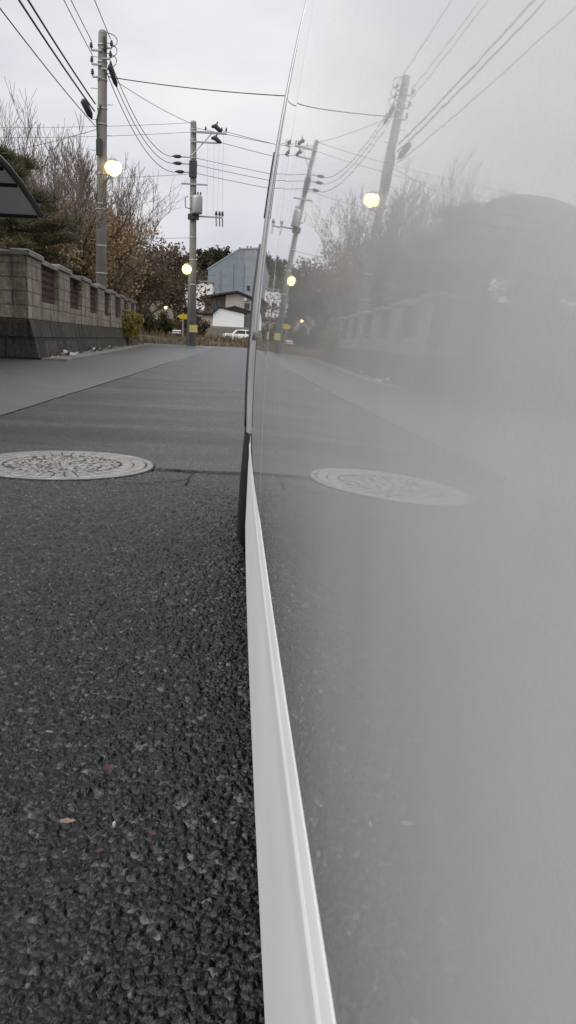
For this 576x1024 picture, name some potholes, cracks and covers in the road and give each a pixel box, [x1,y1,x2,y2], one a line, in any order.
manhole cover [0,451,154,482]
